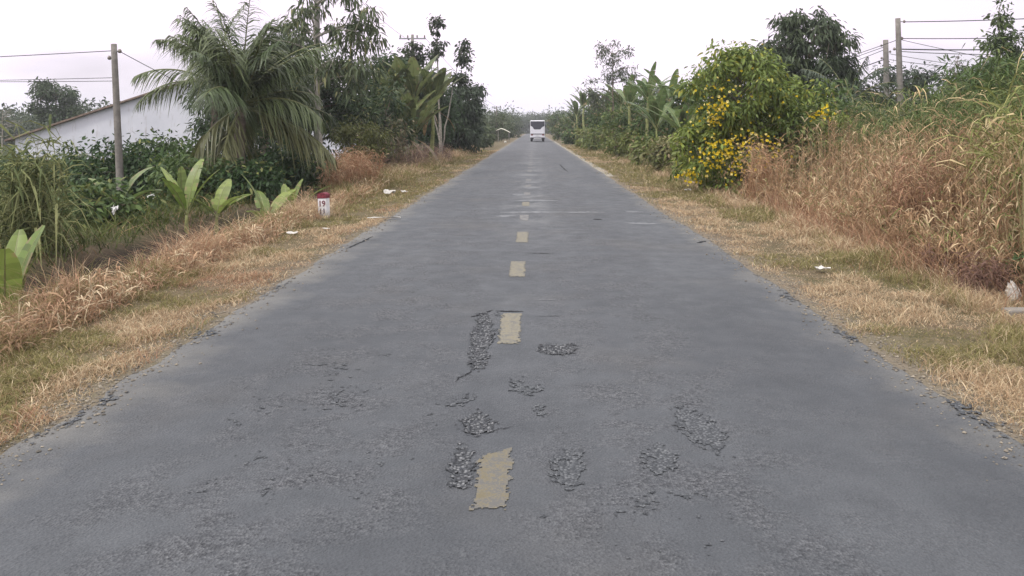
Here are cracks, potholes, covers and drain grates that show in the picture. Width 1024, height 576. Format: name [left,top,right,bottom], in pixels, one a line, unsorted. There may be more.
pothole [536,342,578,355]
pothole [668,403,735,461]
pothole [445,392,477,408]
pothole [455,408,498,436]
pothole [467,312,496,372]
pothole [508,376,544,396]
pothole [548,447,587,491]
pothole [446,441,476,489]
pothole [640,442,680,475]
